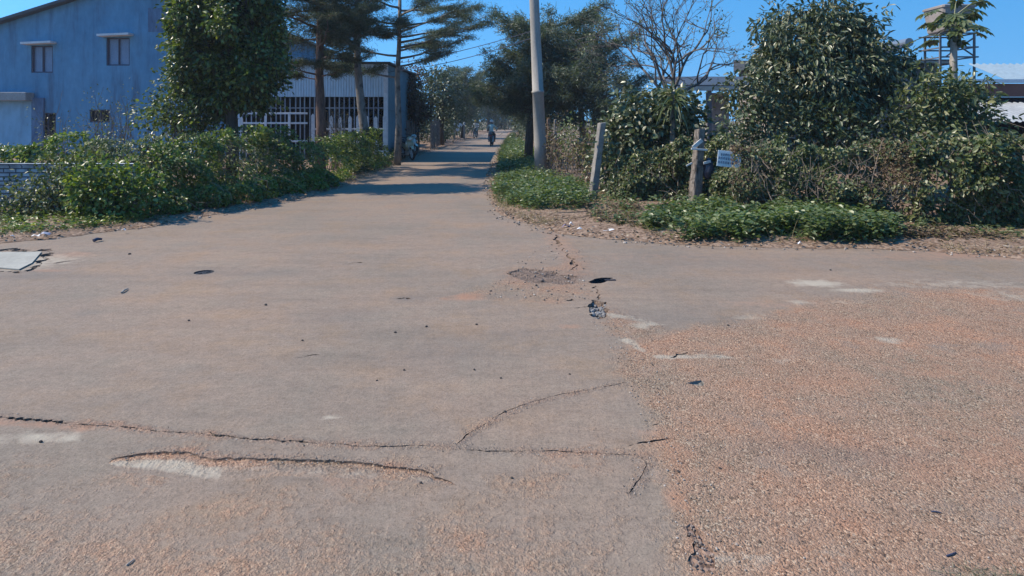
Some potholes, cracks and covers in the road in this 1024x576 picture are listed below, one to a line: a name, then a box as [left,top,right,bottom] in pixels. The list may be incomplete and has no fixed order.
crack [456,382,671,493]
pothole [507,268,583,285]
pothole [587,300,610,319]
crack [553,234,601,308]
crack [0,416,309,443]
